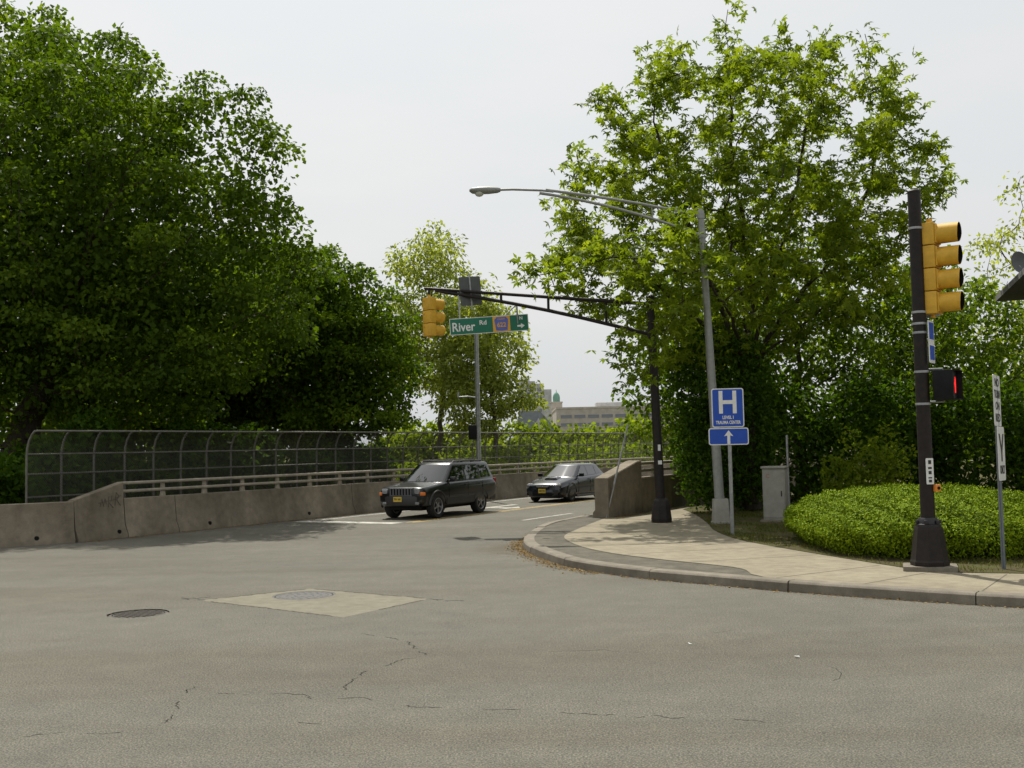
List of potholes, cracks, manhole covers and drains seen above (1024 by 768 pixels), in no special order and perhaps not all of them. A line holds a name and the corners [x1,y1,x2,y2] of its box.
manhole cover [108,610,168,618]
manhole cover [272,591,336,600]
crack [24,687,195,737]
crack [219,634,767,724]
